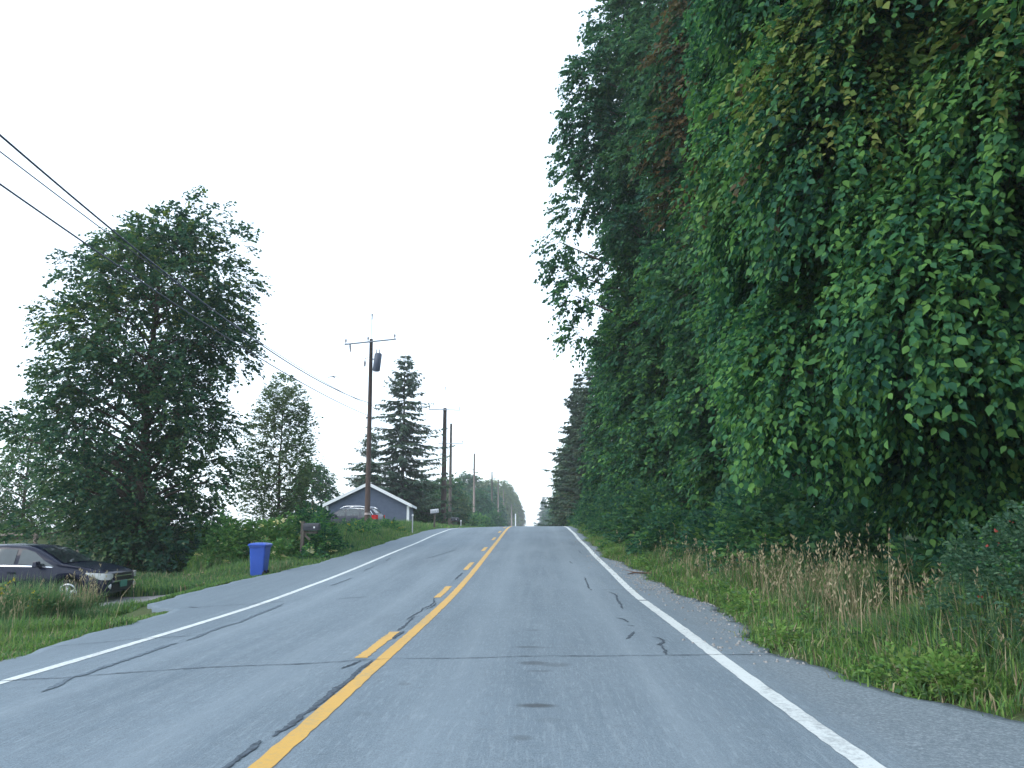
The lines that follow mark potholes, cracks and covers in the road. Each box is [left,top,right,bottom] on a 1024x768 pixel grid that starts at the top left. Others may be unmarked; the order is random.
crack [2,589,793,768]
